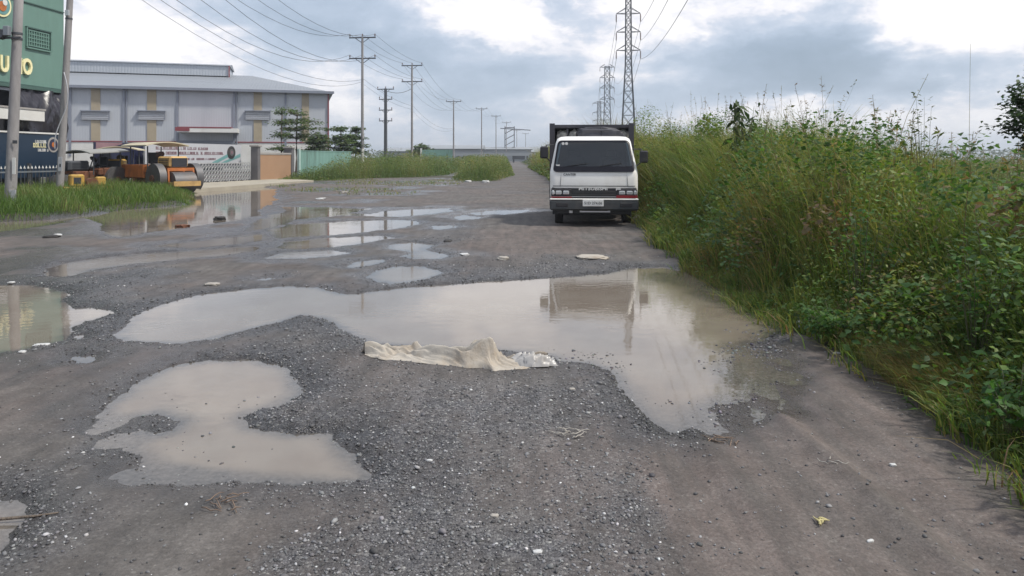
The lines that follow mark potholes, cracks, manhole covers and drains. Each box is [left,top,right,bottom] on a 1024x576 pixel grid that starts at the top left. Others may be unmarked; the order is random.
pothole [380,239,455,259]
pothole [465,207,538,215]
pothole [424,222,464,230]
pothole [0,186,283,238]
pothole [31,243,268,278]
pothole [100,262,804,437]
pothole [360,206,460,217]
pothole [0,280,129,355]
pothole [254,247,359,259]
pothole [72,351,398,490]
pothole [270,233,404,250]
